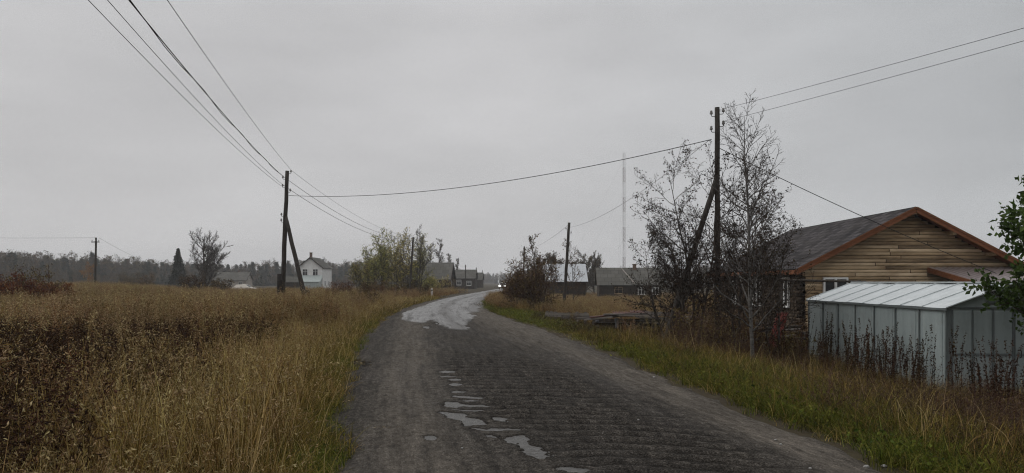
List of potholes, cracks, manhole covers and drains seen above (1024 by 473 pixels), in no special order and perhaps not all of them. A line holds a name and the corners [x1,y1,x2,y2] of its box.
pothole [486,415,515,424]
pothole [479,432,559,461]
pothole [437,399,495,409]
pothole [433,410,494,428]
pothole [417,433,444,442]
pothole [547,464,599,473]
